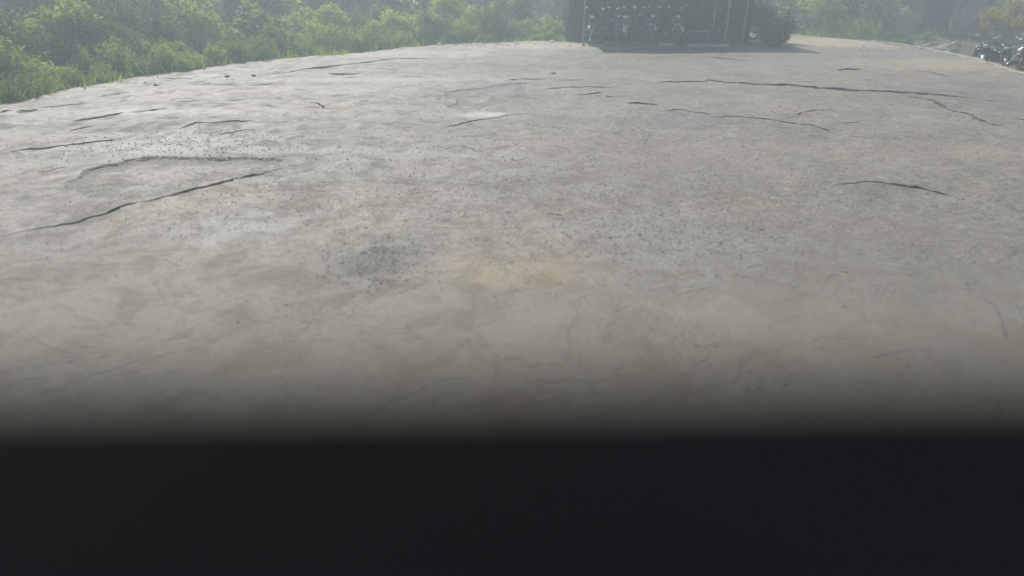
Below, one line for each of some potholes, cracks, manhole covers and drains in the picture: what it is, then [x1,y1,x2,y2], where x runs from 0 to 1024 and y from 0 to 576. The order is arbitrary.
crack [5,92,161,173]
crack [837,173,956,197]
crack [179,105,274,135]
crack [511,78,611,97]
crack [446,114,519,127]
crack [8,168,281,236]
crack [629,68,1024,138]
